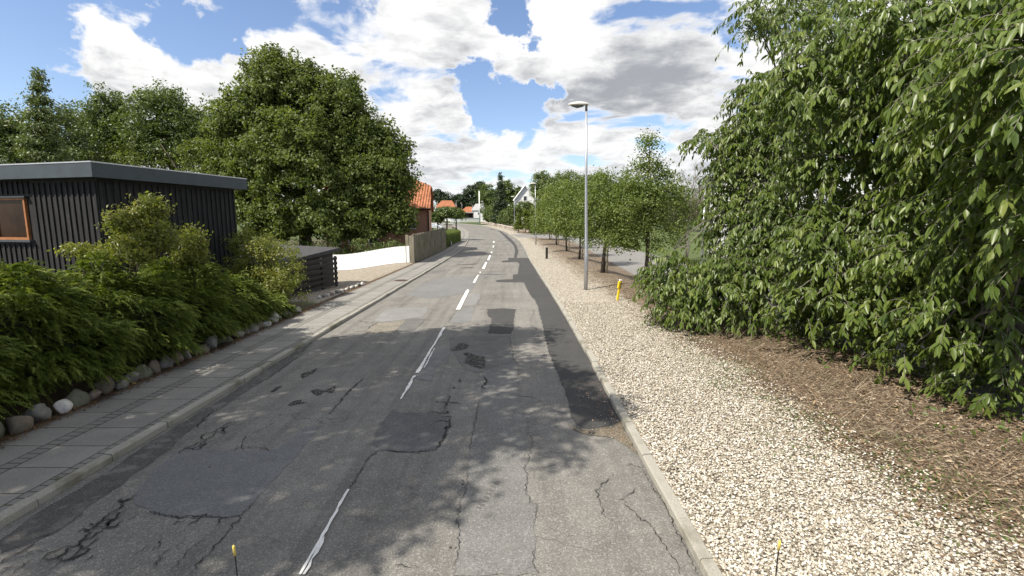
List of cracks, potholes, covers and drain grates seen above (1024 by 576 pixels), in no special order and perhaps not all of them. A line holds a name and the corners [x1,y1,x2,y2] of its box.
pothole [463,352,486,369]
crack [179,347,311,453]
crack [1,494,240,573]
crack [595,463,680,574]
